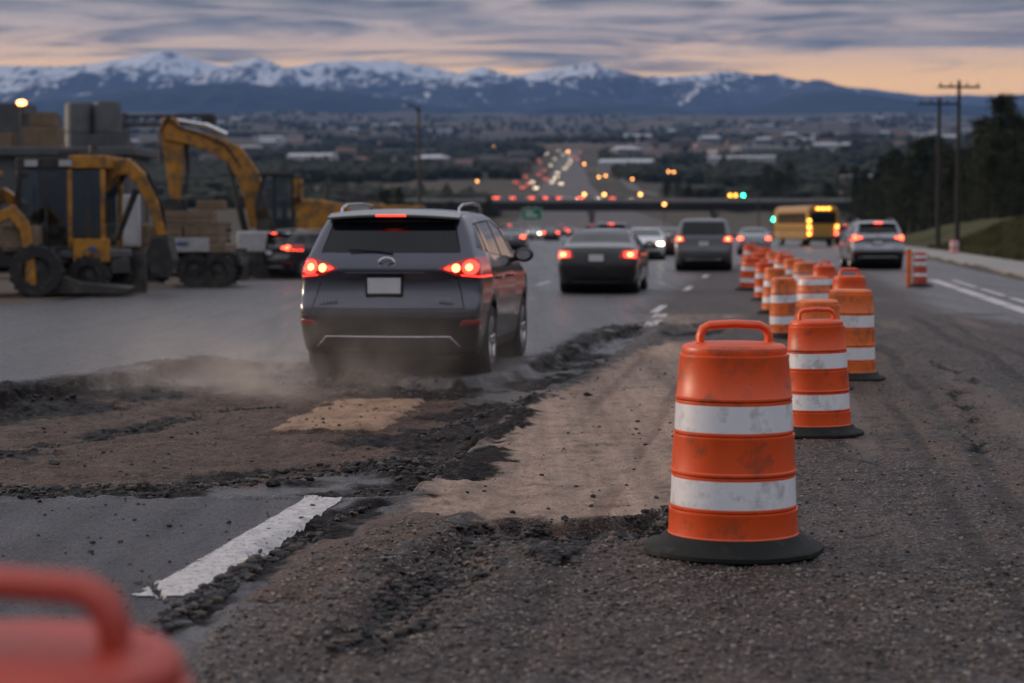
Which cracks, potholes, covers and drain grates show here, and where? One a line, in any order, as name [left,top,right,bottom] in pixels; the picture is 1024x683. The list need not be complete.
pothole [0,325,651,500]
